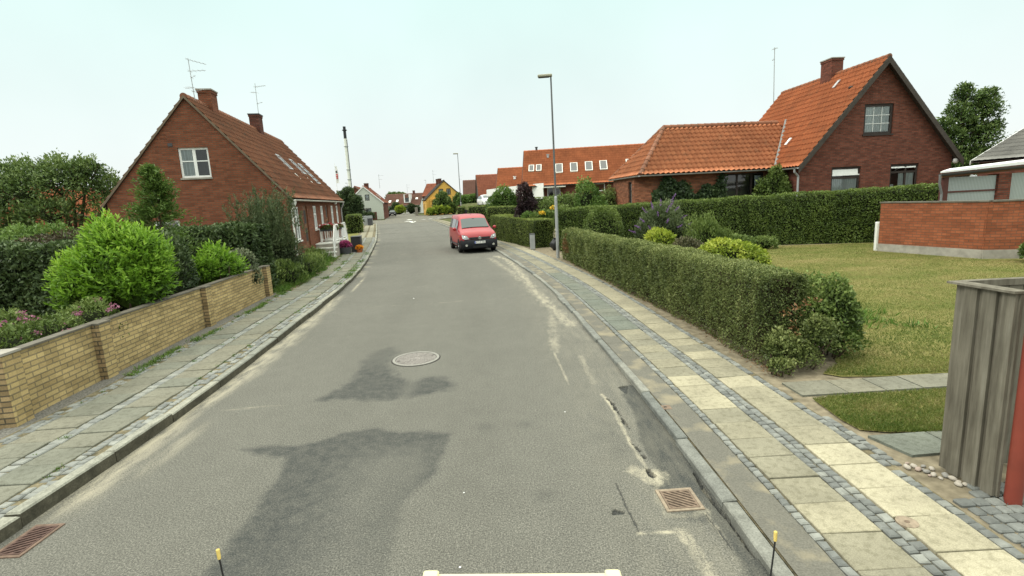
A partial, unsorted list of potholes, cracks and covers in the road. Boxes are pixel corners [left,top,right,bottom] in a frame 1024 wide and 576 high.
crack [615,483,640,532]
manhole cover [391,351,441,367]
crack [606,398,647,459]
drain grate [655,487,705,513]
drain grate [0,523,65,559]
